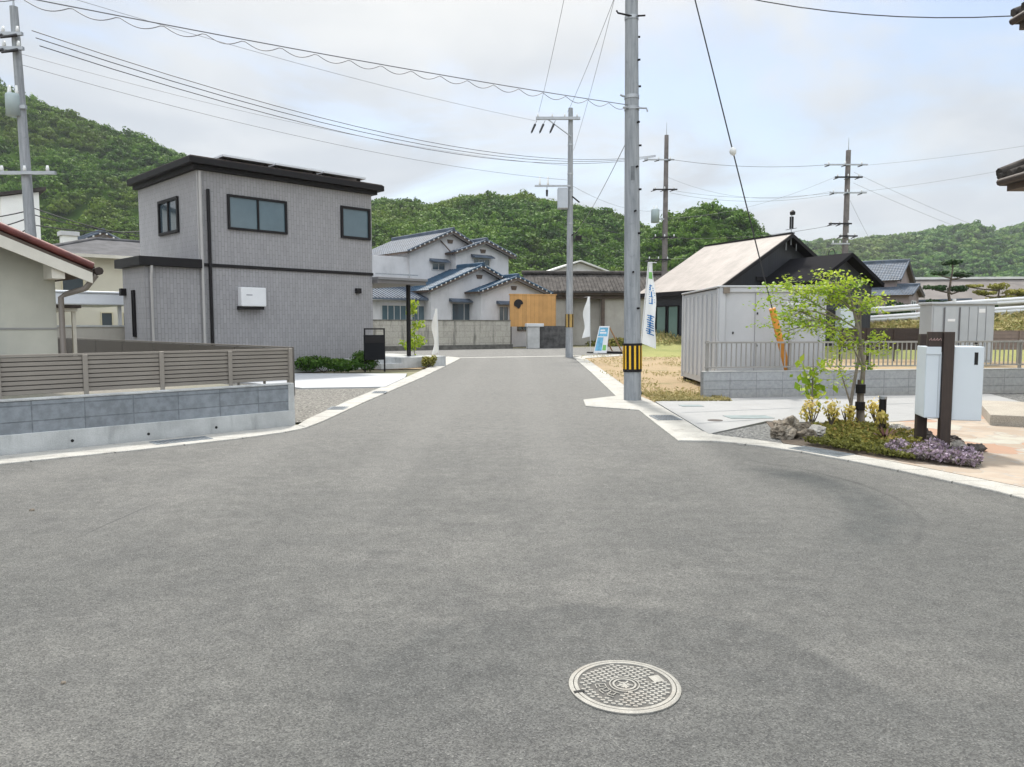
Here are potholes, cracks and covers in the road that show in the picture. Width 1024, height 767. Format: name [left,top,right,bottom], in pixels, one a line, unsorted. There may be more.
manhole cover [569,660,681,715]
drain grate [150,436,213,445]
